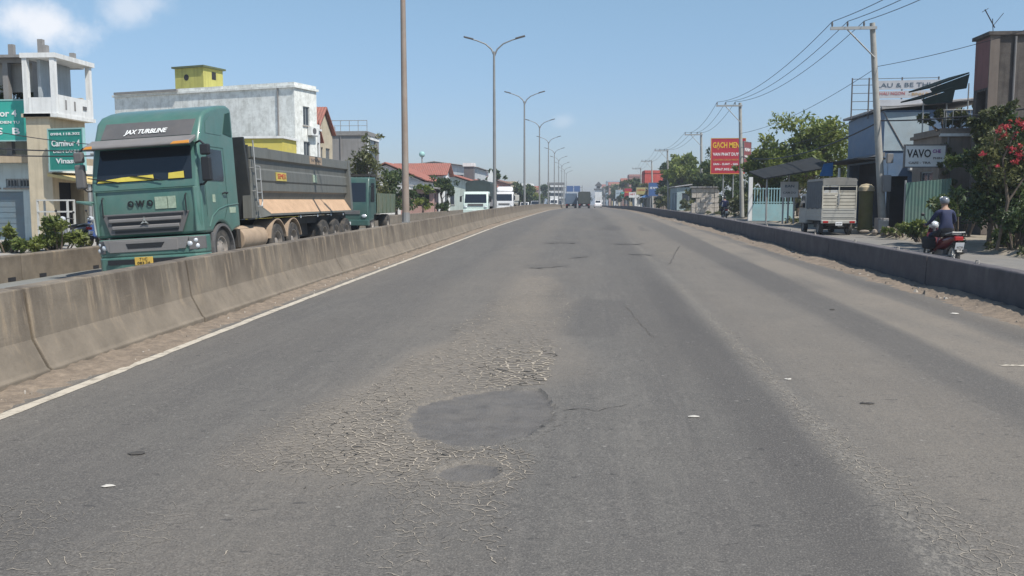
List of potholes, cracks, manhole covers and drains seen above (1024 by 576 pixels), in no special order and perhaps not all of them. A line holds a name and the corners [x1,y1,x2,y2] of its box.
crack [0,499,189,576]
